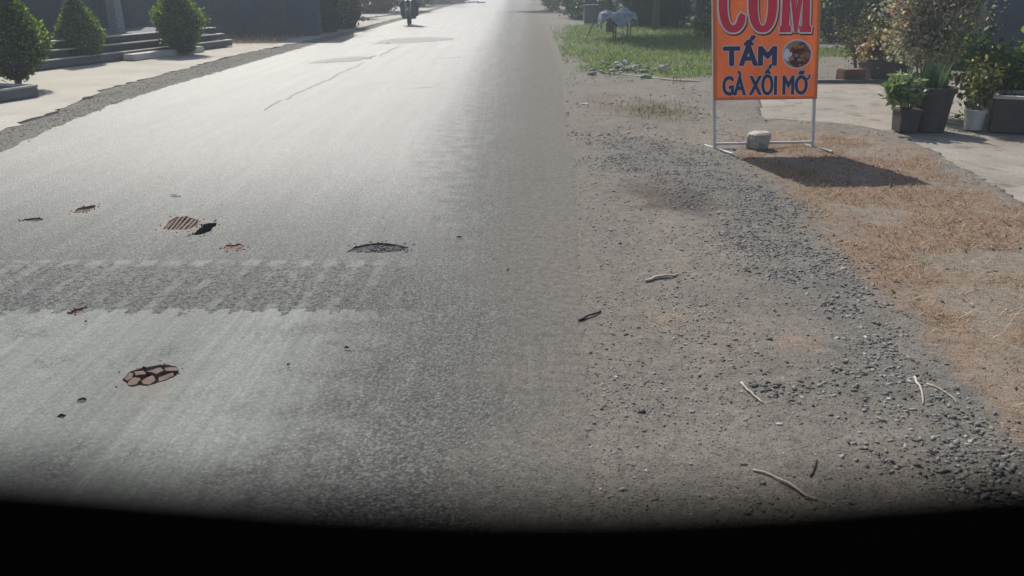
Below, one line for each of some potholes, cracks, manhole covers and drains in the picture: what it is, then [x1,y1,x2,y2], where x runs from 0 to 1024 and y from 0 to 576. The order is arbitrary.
pothole [220,241,249,252]
crack [265,46,399,110]
pothole [187,219,220,236]
pothole [347,240,415,253]
pothole [74,205,99,213]
